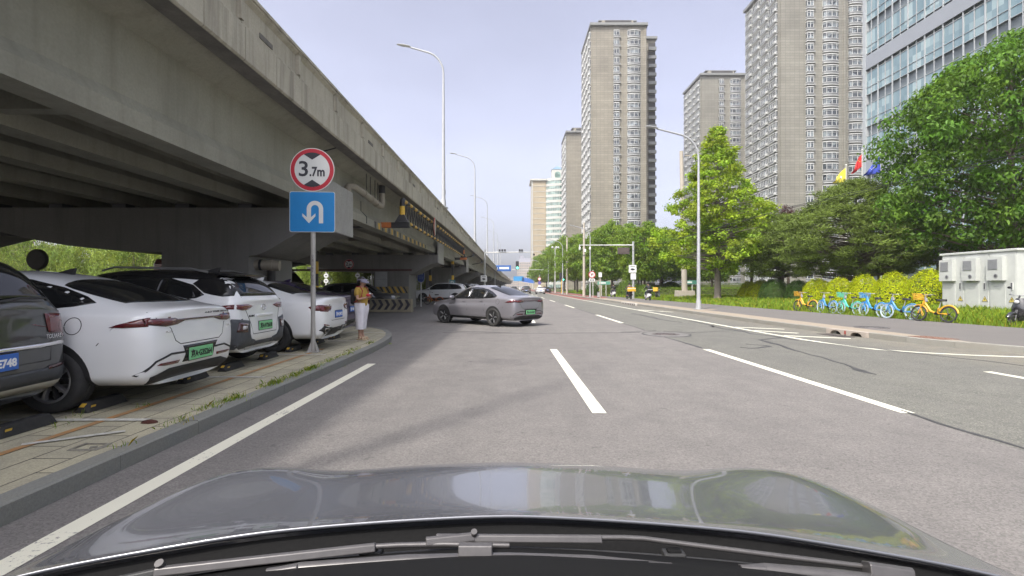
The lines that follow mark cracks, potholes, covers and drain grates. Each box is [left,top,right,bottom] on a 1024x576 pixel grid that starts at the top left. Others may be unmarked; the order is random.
drain grate [822,328,872,338]
